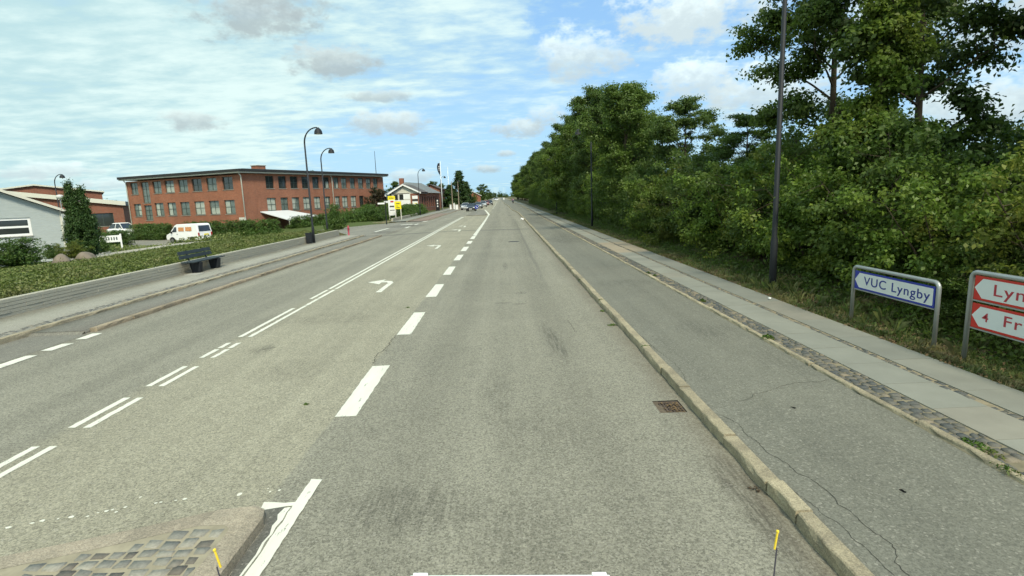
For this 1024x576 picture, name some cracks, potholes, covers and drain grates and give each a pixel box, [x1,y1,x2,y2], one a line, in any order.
drain grate [652,400,687,413]
crack [715,413,913,576]
